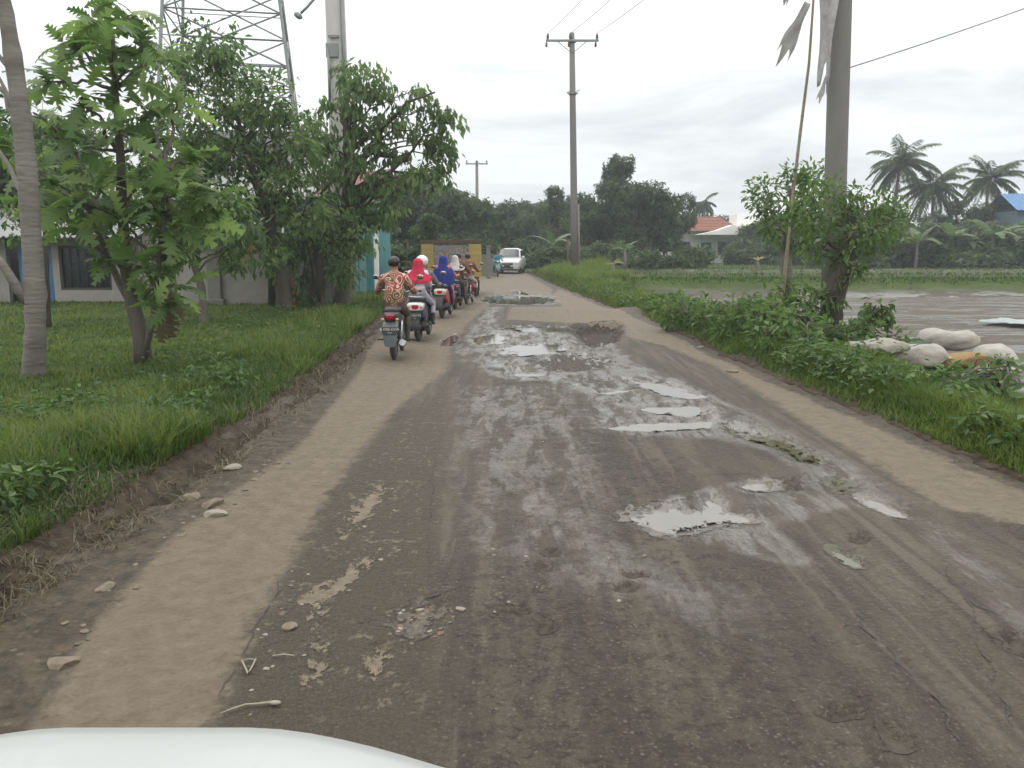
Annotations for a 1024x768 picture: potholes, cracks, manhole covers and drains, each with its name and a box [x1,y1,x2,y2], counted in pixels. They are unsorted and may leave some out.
pothole [716,420,836,468]
pothole [737,477,792,493]
pothole [591,417,729,433]
pothole [485,340,583,358]
pothole [610,495,772,540]
pothole [850,492,915,521]
pothole [382,590,459,645]
pothole [476,293,561,305]
pothole [438,333,462,347]
pothole [625,377,707,399]
pothole [628,402,719,417]
